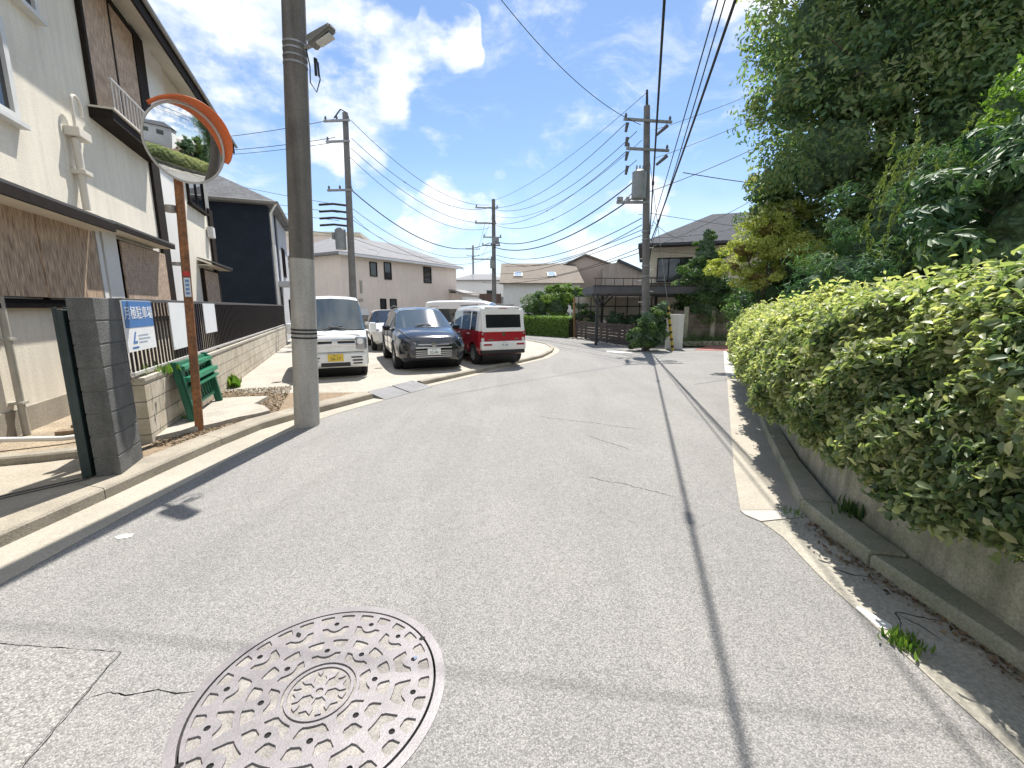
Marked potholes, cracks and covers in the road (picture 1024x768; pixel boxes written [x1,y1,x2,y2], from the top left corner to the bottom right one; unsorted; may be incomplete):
crack [894,612,943,641]
manhole cover [161,606,445,768]
